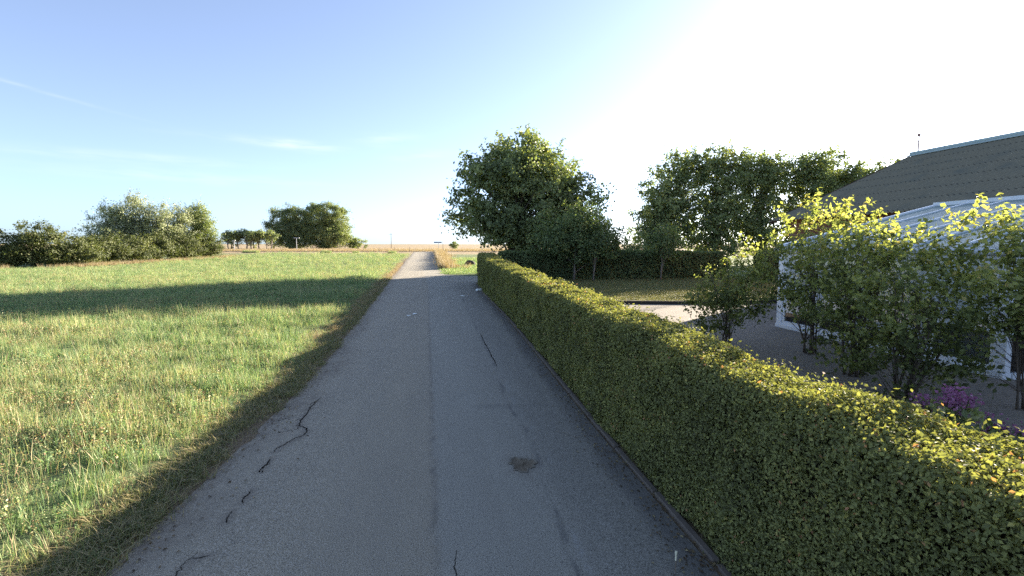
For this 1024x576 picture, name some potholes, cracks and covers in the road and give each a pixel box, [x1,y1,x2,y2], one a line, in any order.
crack [226,398,320,522]
